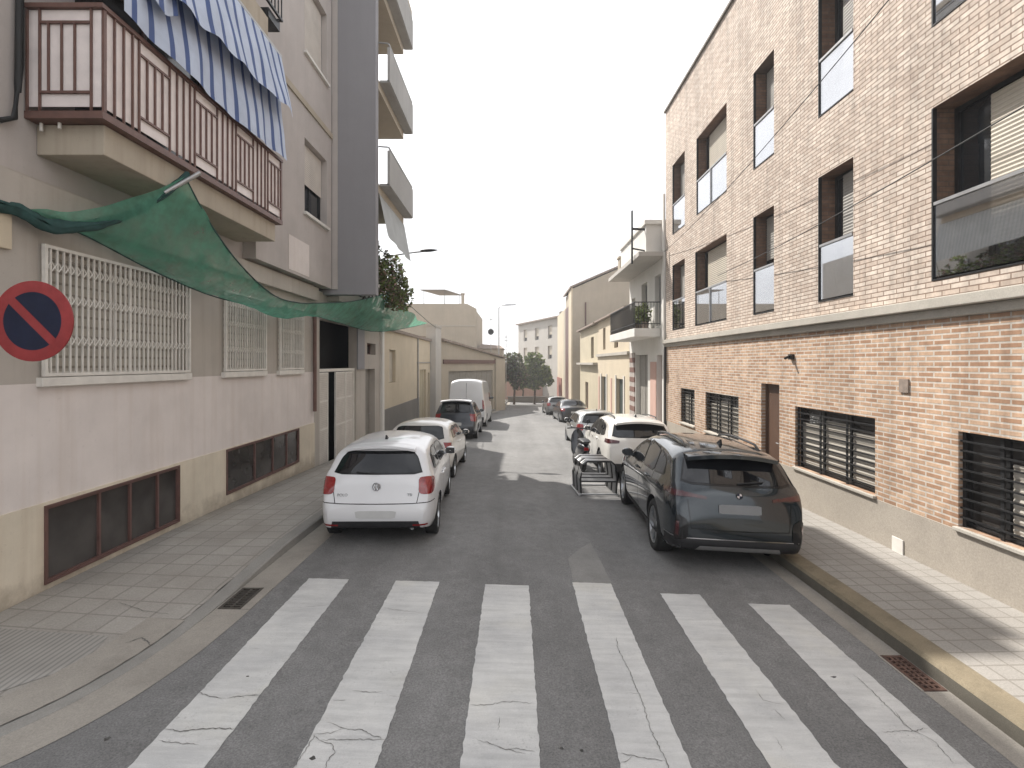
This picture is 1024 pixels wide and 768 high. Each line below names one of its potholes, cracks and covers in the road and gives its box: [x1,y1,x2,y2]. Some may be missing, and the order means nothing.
crack [159,727,231,745]
crack [616,637,669,768]
crack [857,677,951,760]
crack [471,701,531,753]
crack [297,722,381,767]
drain grate [878,655,948,692]
drain grate [216,588,273,609]
